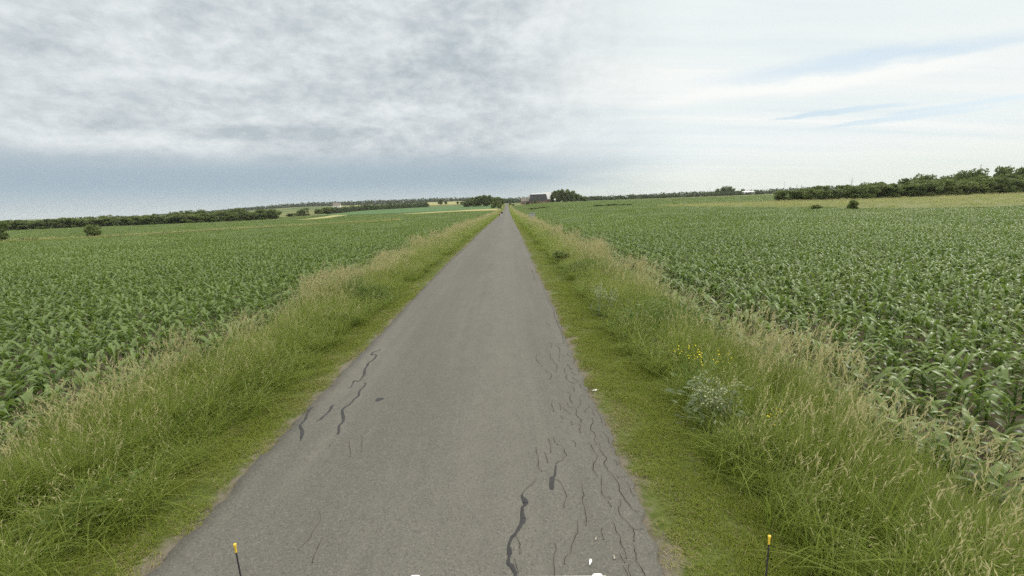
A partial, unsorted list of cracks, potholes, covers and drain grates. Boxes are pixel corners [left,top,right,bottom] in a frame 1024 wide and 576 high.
crack [524,269,647,576]
